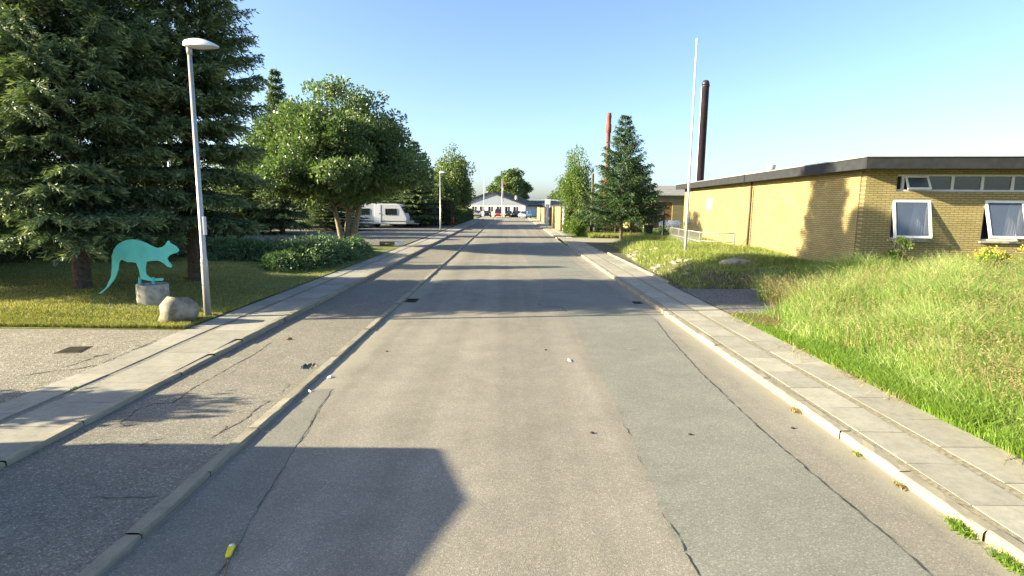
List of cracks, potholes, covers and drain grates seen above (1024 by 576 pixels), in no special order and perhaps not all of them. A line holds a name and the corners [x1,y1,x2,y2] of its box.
crack [623,425,700,576]
crack [211,384,290,438]
crack [218,388,333,576]
crack [97,342,271,451]
